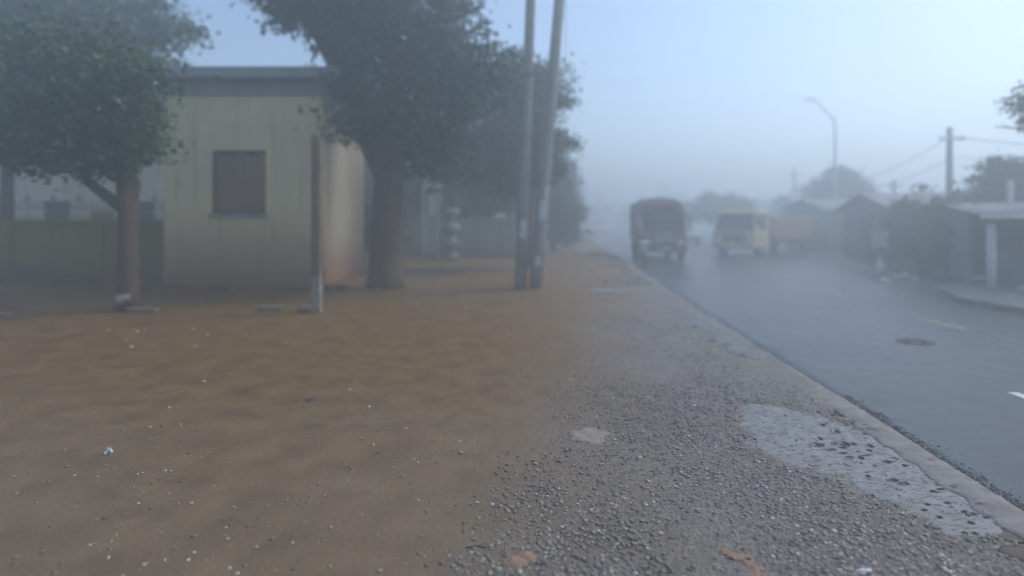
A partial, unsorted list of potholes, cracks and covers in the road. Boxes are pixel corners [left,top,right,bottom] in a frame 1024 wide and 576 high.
manhole cover [896,338,936,346]
